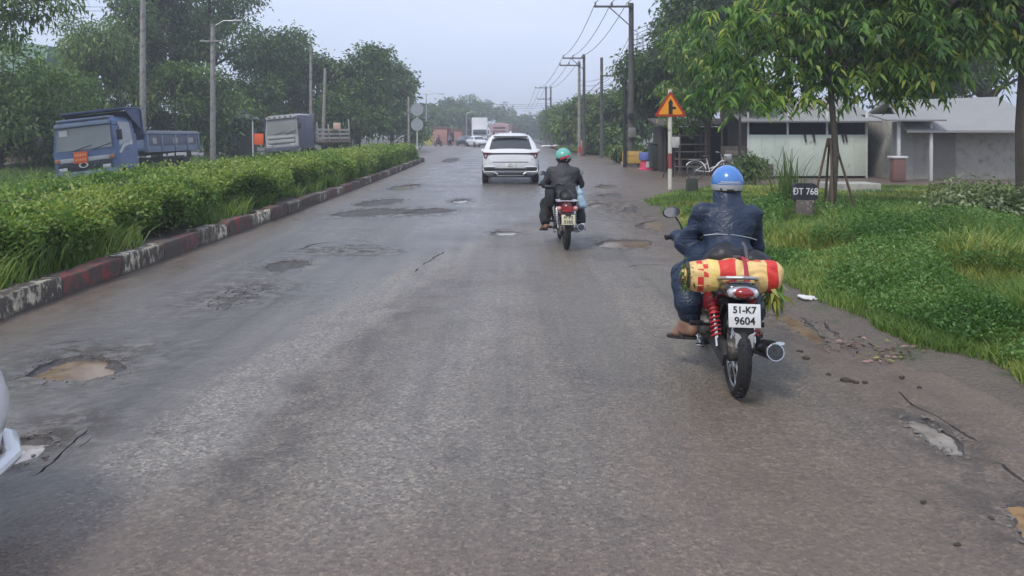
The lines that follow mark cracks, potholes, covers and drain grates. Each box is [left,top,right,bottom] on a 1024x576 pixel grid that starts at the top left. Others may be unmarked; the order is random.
pothole [261,260,312,272]
pothole [327,206,466,217]
pothole [891,411,974,463]
pothole [591,237,657,250]
pothole [0,429,65,467]
crack [32,430,92,477]
pothole [13,351,142,385]
